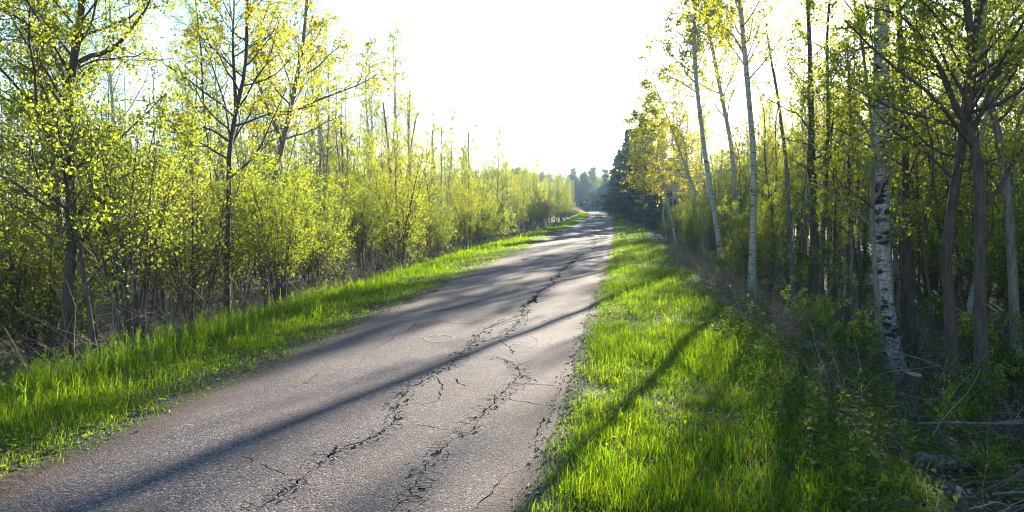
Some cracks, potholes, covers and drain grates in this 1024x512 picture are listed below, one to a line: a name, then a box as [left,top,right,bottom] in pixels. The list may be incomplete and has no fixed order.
crack [239,214,603,512]
